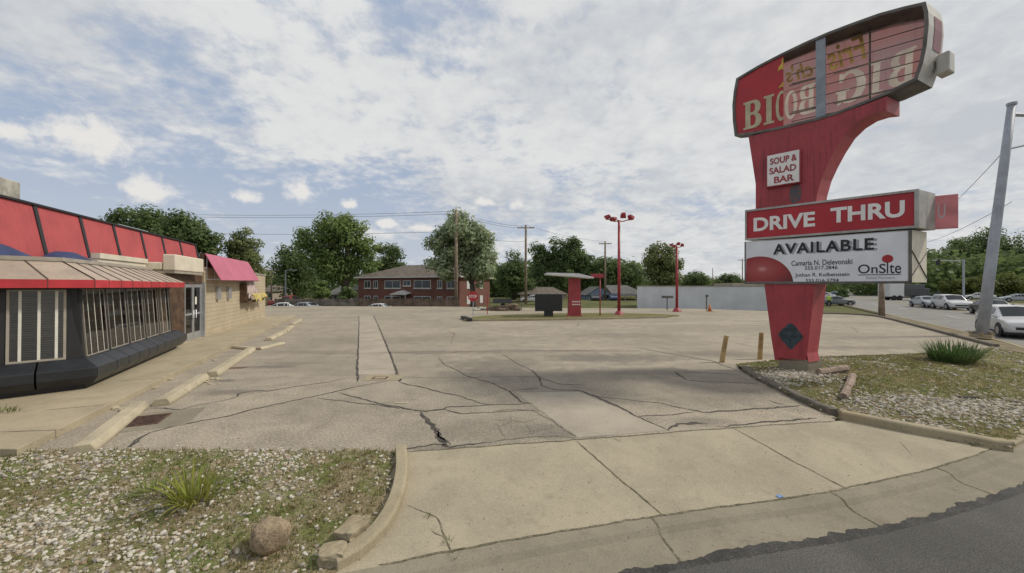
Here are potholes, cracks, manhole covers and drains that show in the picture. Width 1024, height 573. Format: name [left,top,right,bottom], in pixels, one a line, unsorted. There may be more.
crack [636,347,734,383]
crack [408,505,453,553]
drain grate [119,407,206,433]
crack [126,355,812,449]
